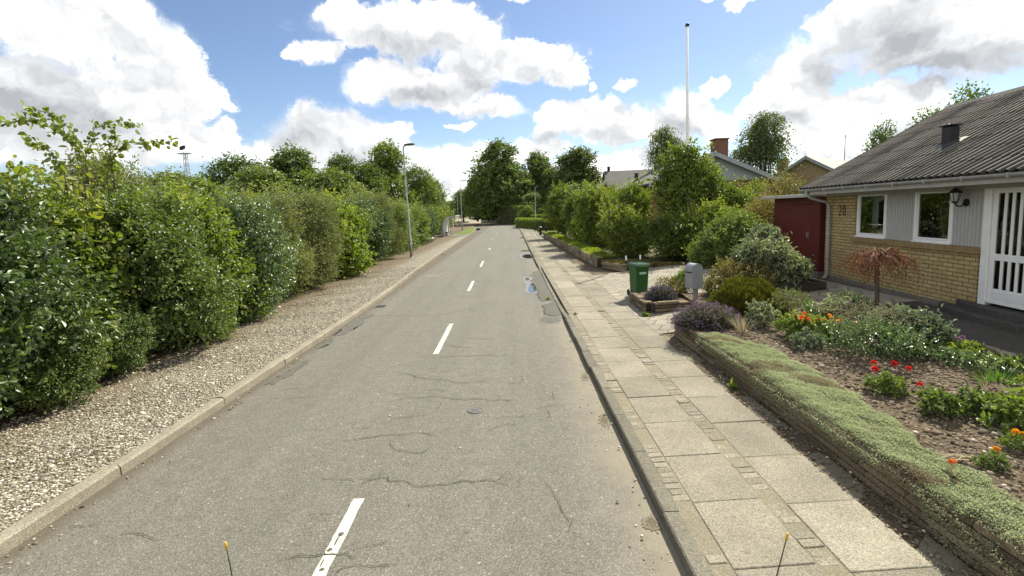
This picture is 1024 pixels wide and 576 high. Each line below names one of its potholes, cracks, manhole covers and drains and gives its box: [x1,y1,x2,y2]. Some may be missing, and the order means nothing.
crack [322,474,510,486]
crack [344,338,555,453]
